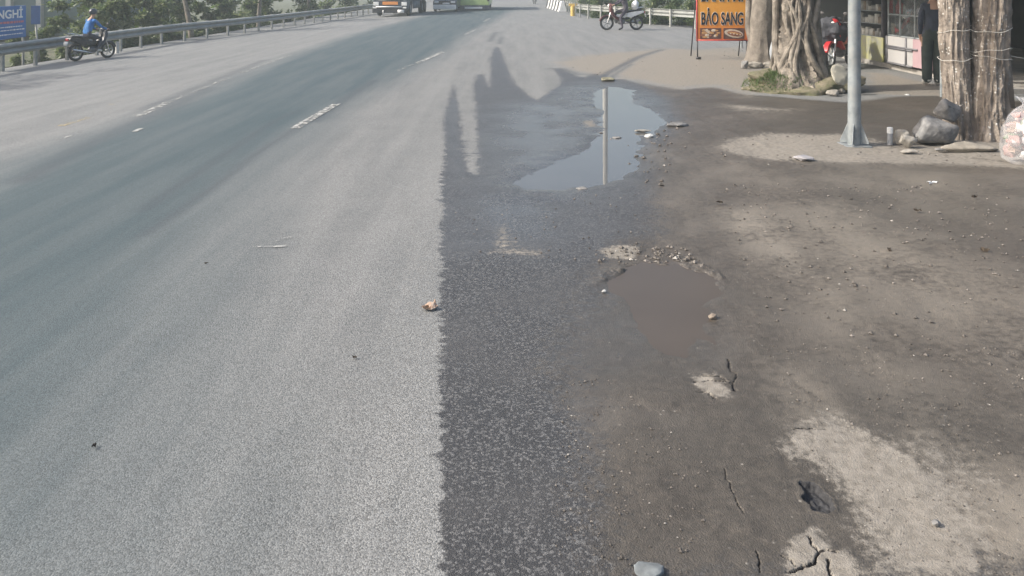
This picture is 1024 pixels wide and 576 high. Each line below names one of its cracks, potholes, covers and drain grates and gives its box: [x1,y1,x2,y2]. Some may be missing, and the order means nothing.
crack [694,359,738,400]
pothole [578,270,738,378]
pothole [798,480,836,514]
crack [780,537,839,576]
